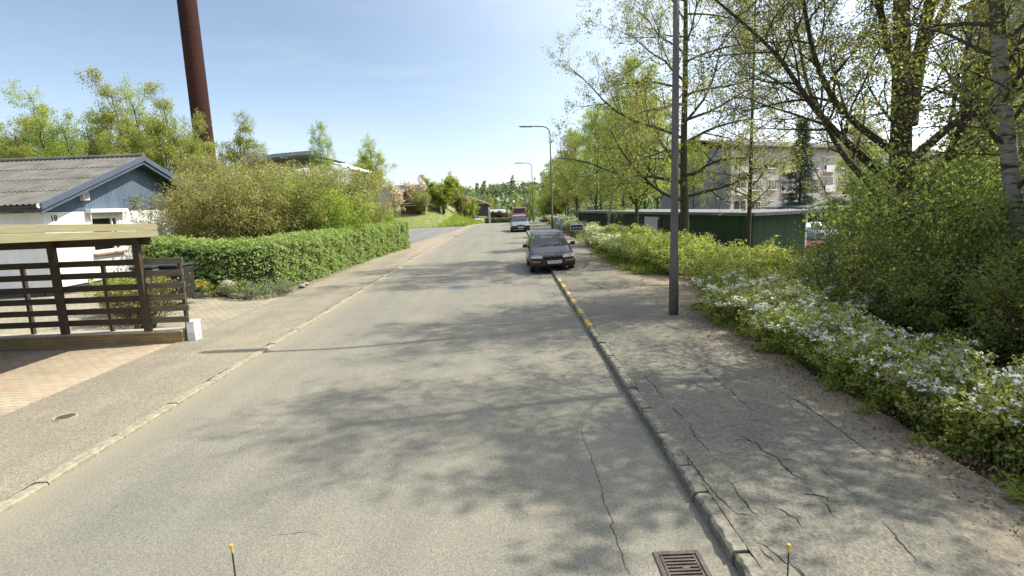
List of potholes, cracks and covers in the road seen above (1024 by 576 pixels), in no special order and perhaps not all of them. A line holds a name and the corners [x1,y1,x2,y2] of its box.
drain grate [653,550,712,576]
crack [673,367,849,527]
crack [780,391,879,458]
crack [755,540,805,576]
crack [580,422,630,576]
utility cover [51,412,78,421]
